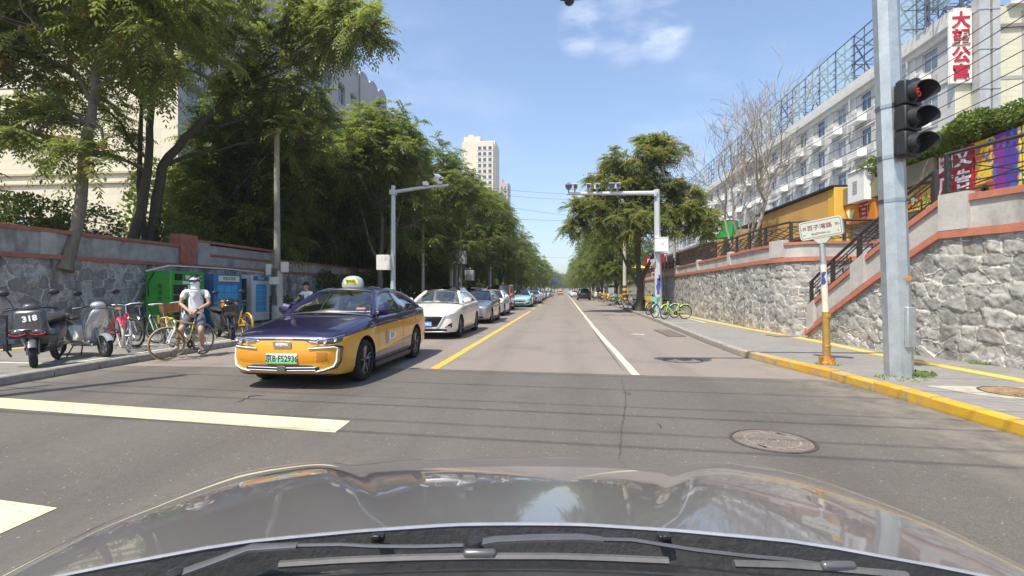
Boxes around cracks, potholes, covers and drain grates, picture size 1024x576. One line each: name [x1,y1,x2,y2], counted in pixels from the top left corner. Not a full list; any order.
manhole cover [729,429,819,454]
manhole cover [976,386,1024,398]
